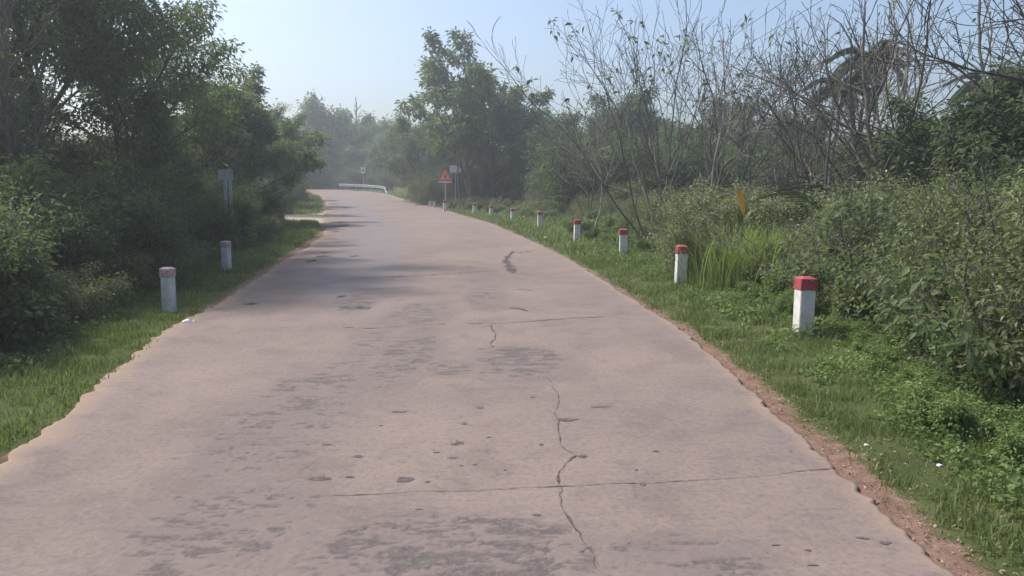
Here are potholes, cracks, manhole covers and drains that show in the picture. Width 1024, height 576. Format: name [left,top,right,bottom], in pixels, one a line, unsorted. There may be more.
crack [344,308,603,349]
crack [267,378,829,569]
crack [360,249,535,291]
